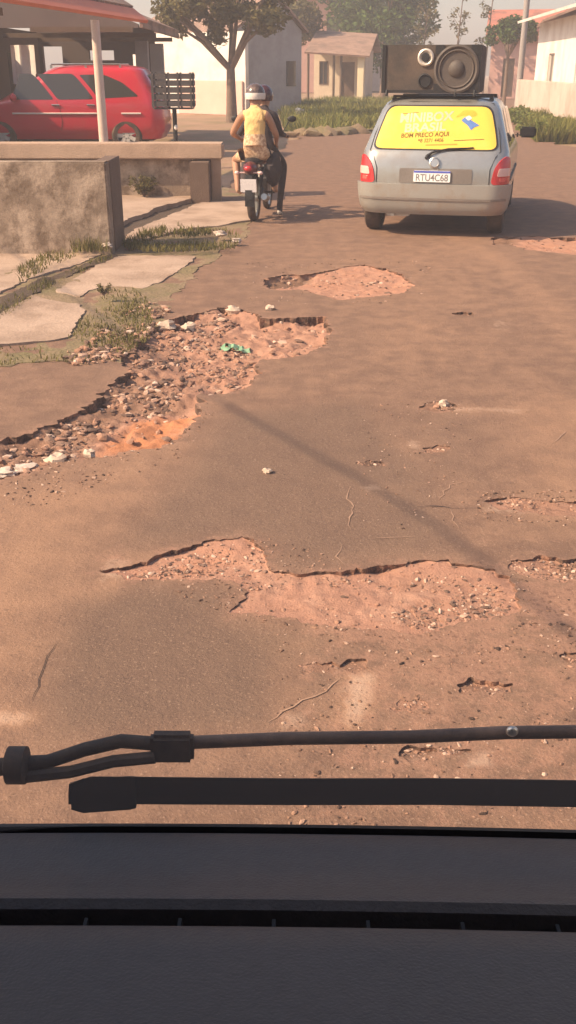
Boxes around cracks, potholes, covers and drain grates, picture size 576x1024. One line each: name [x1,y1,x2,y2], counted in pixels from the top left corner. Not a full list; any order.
pothole [484,497,576,516]
crack [268,678,340,722]
pothole [0,307,333,480]
pothole [263,265,415,300]
pothole [99,536,522,635]
pothole [490,236,576,255]
pothole [508,555,576,583]
